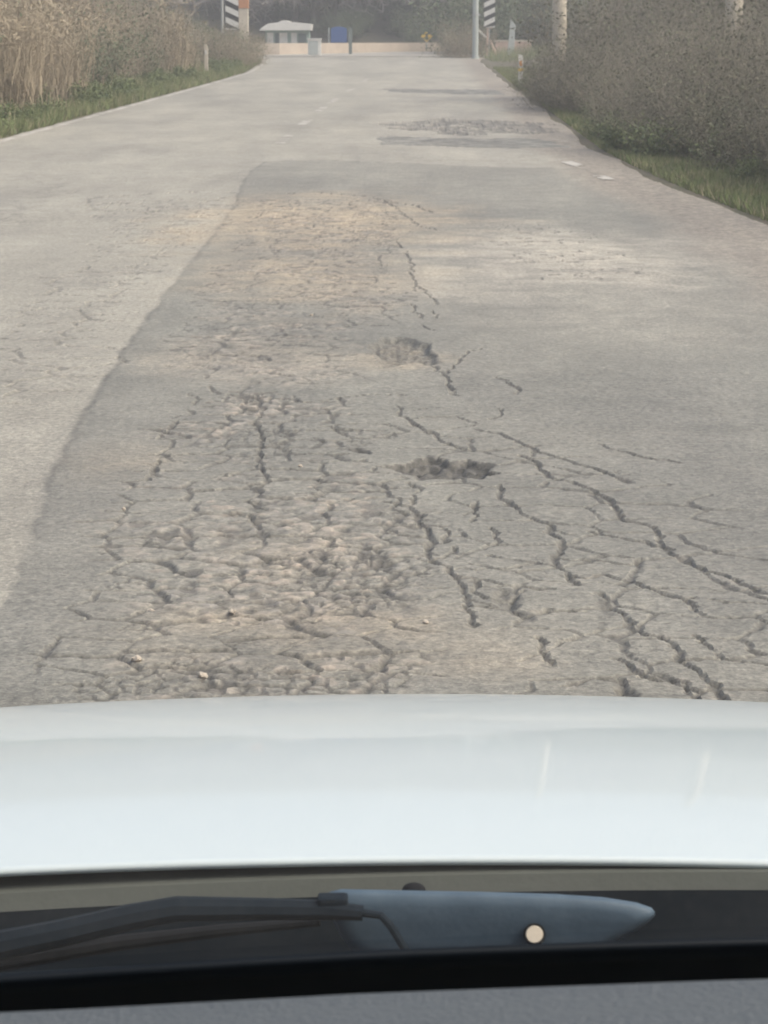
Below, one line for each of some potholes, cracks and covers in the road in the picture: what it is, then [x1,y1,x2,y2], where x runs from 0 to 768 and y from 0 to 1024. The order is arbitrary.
pothole [376,454,504,481]
crack [0,178,768,702]
pothole [363,336,446,370]
